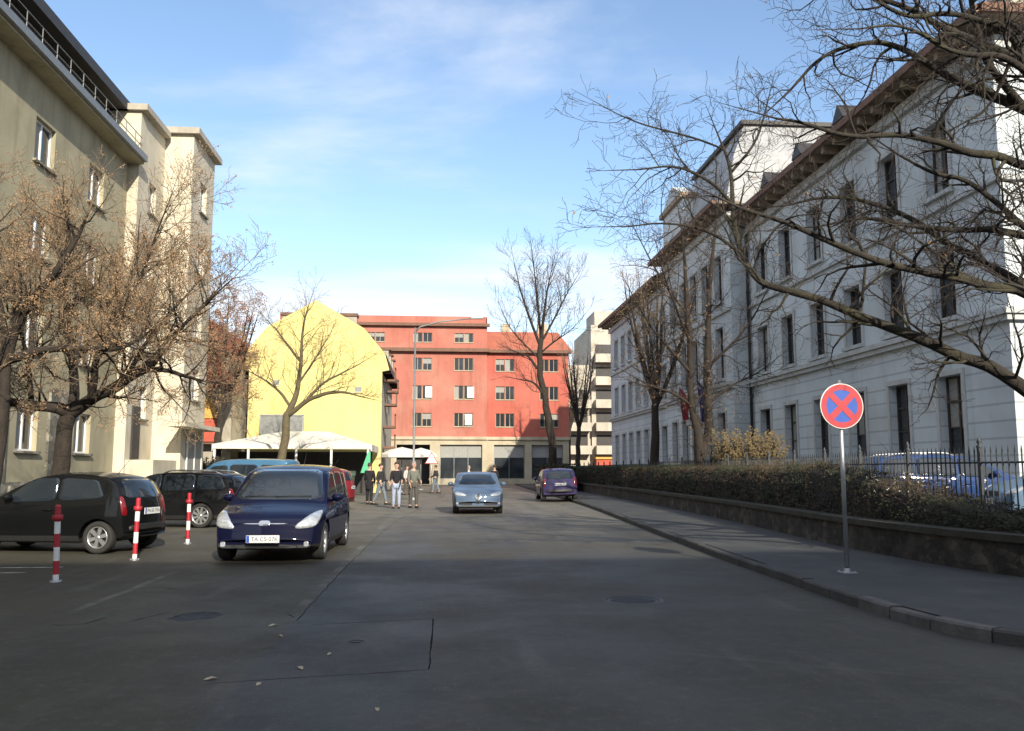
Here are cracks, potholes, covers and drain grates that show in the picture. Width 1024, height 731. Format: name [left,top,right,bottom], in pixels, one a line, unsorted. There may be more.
manhole cover [602,595,664,604]
